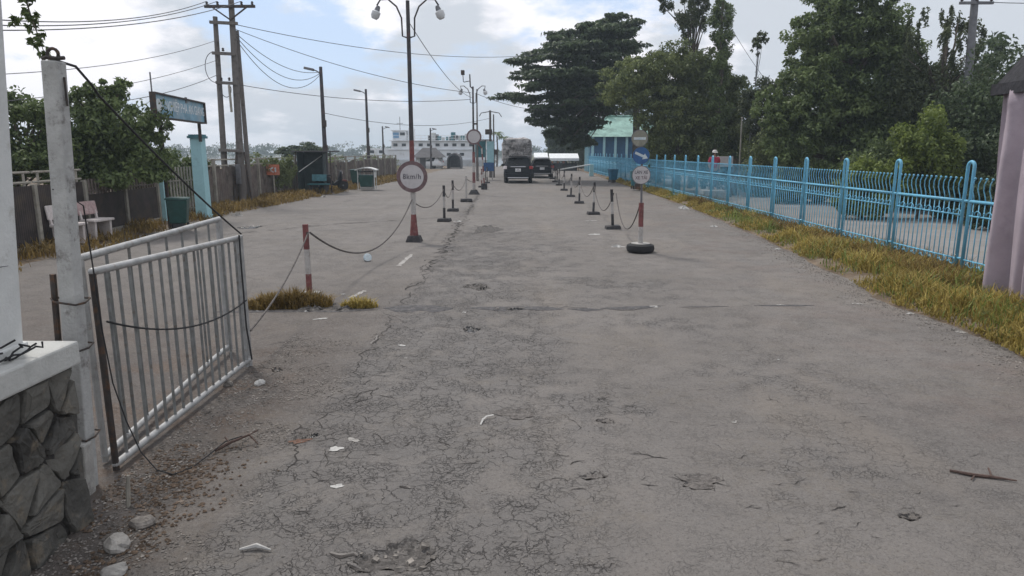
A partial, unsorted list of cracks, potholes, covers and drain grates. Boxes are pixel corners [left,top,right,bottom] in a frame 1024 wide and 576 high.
crack [281,259,458,489]
pothole [579,471,608,480]
pothole [674,473,723,490]
pothole [474,225,503,233]
crack [517,436,602,511]
pothole [898,512,921,521]
crack [330,551,373,572]
crack [394,553,467,572]
